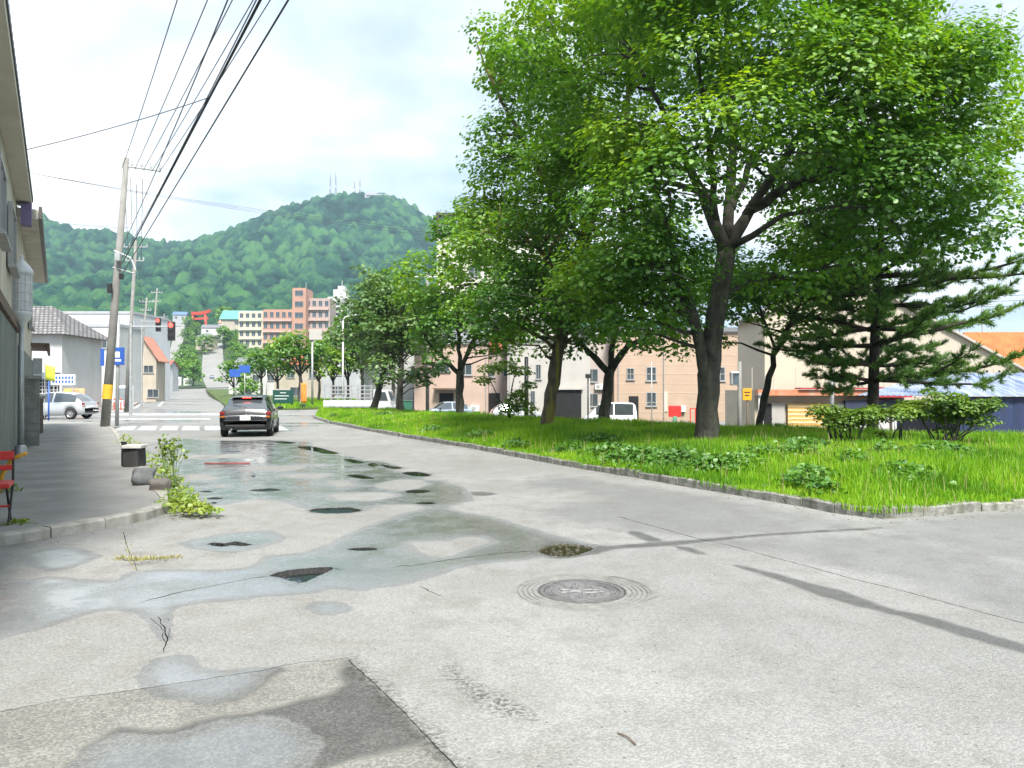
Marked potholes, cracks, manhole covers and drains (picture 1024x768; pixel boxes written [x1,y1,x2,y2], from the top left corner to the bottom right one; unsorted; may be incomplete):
pothole [270,567,334,583]
crack [150,617,170,653]
pothole [539,544,594,557]
manhole cover [513,574,659,611]
